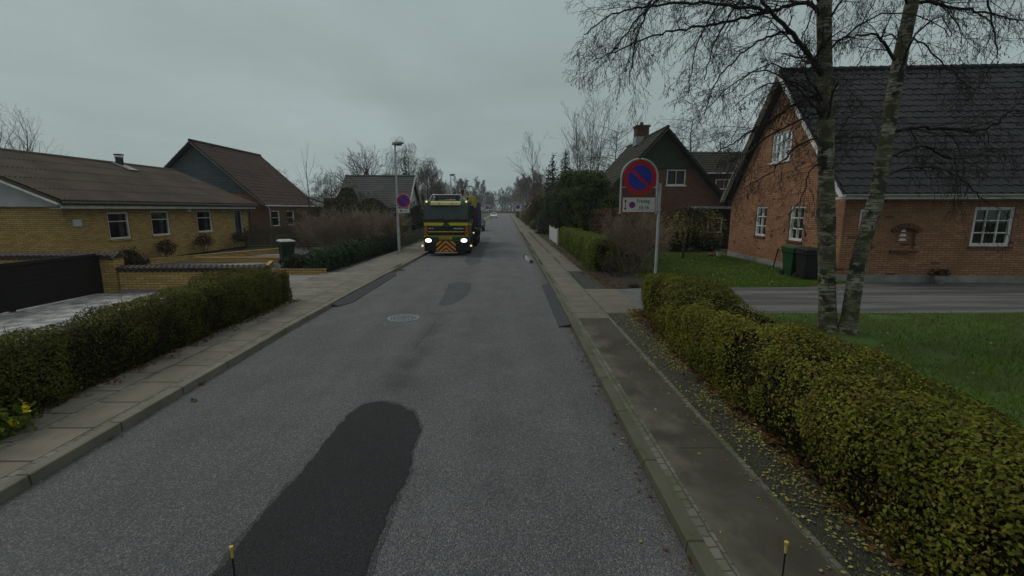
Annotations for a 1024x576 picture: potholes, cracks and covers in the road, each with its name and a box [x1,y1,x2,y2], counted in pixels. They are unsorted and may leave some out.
manhole cover [387,314,419,322]
